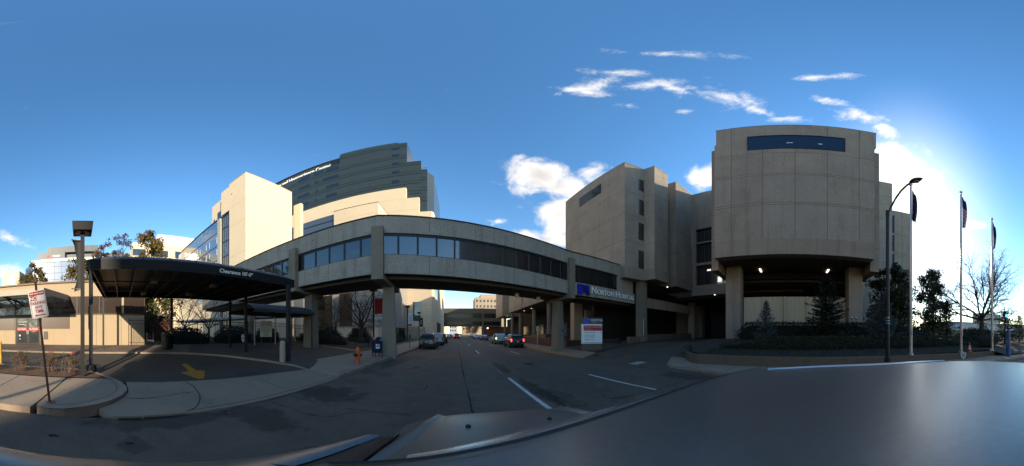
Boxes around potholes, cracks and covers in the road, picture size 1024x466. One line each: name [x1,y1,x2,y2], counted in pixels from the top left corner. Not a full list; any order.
crack [271,395,411,417]
